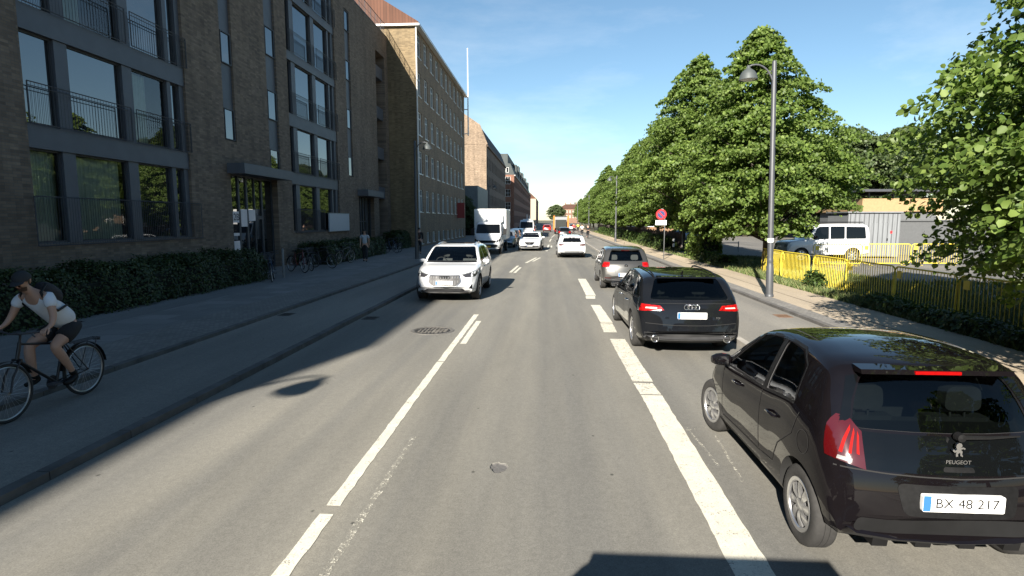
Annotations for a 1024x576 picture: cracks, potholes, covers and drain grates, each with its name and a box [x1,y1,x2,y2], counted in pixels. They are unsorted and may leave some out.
pothole [490,462,508,473]
manhole cover [411,326,454,335]
